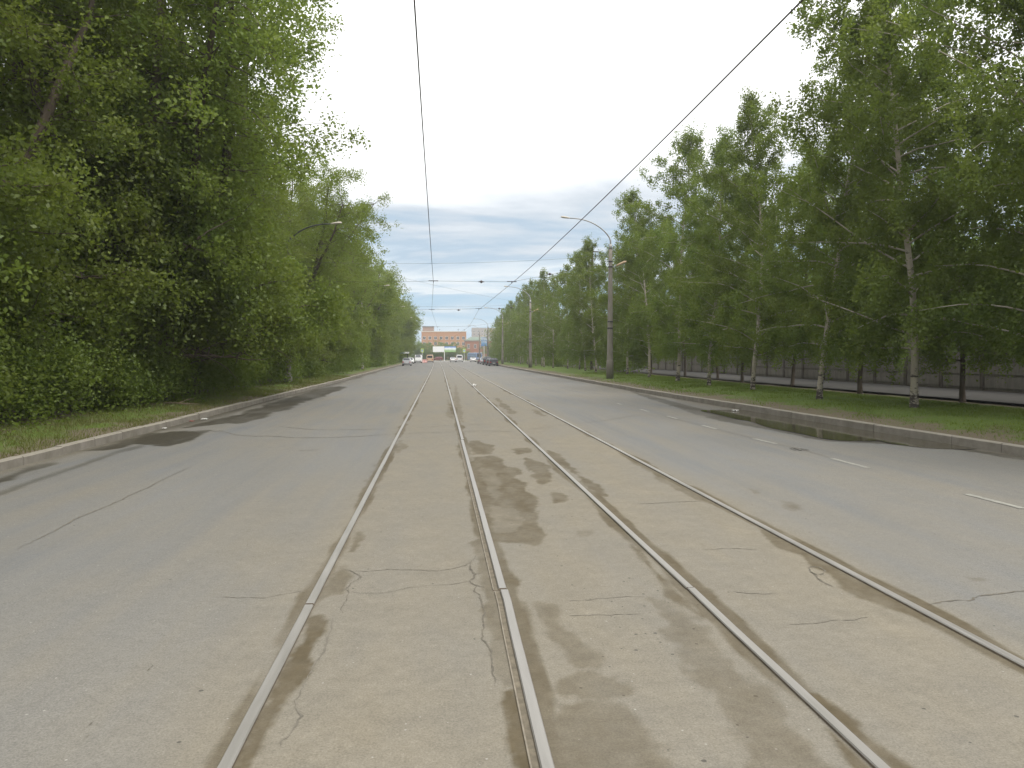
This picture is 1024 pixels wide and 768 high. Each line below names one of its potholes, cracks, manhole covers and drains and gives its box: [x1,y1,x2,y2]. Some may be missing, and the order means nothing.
crack [280,556,497,744]
crack [932,591,1015,604]
crack [808,566,832,586]
crack [18,467,189,549]
